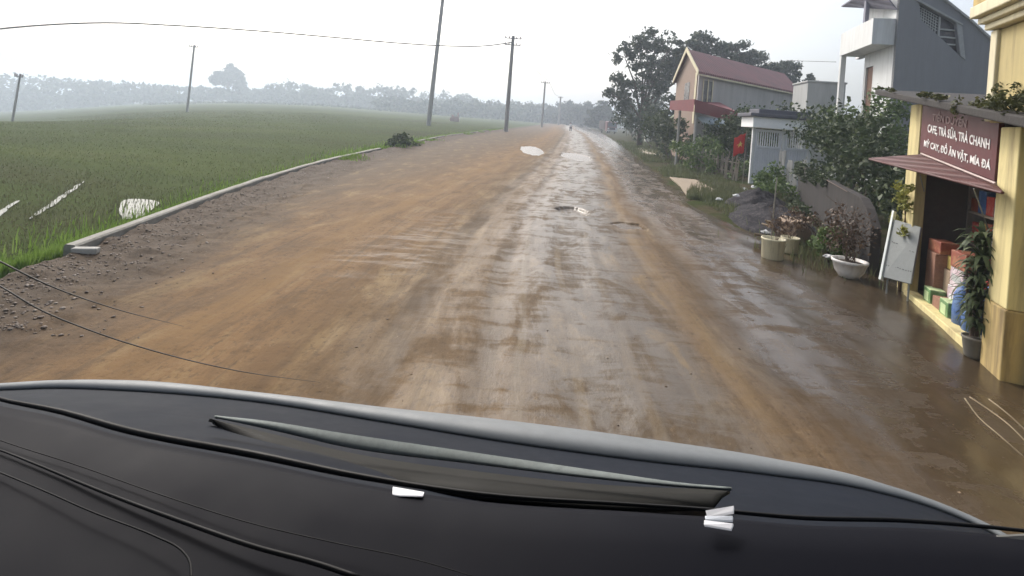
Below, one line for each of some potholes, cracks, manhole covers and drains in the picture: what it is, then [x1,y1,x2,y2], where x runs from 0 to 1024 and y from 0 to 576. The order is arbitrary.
pothole [553,151,603,163]
pothole [511,145,554,158]
pothole [595,219,664,234]
pothole [540,203,604,220]
